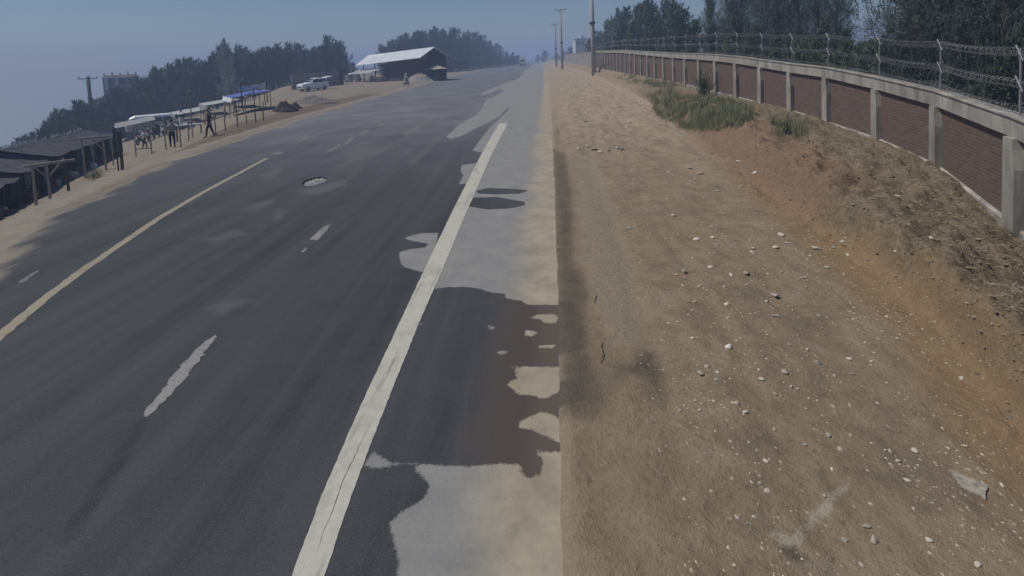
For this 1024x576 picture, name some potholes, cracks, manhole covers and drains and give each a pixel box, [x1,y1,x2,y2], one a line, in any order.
pothole [301,177,327,186]
